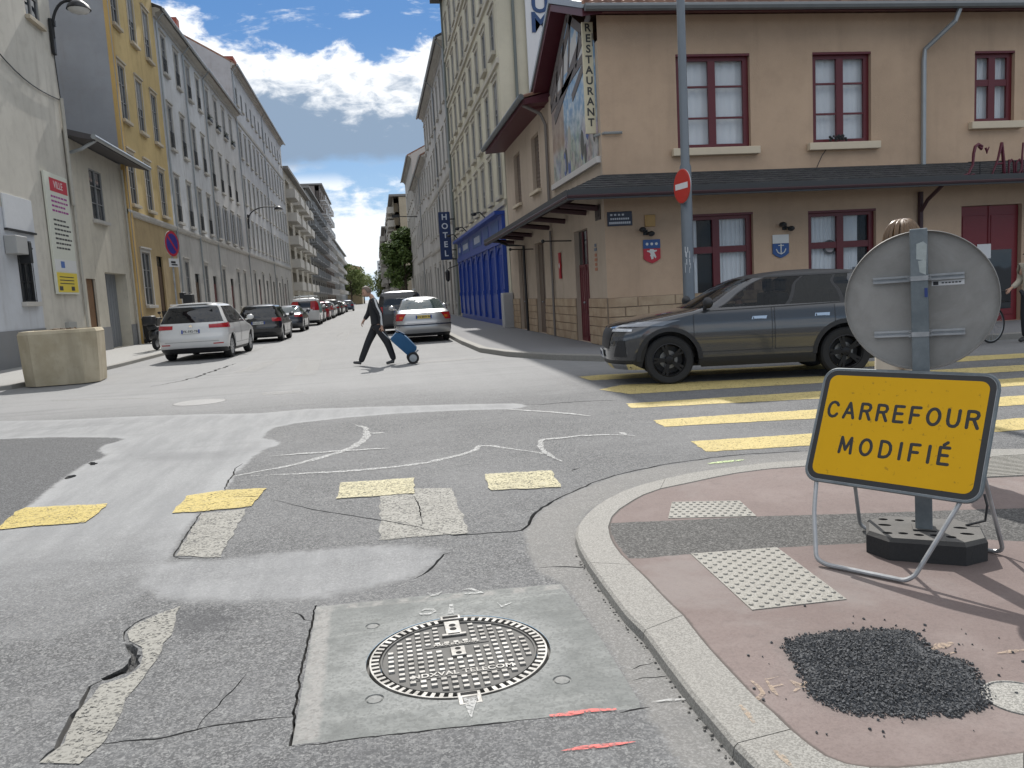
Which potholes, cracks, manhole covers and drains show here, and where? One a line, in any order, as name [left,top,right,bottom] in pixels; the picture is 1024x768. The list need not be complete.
crack [276,497,453,536]
crack [39,672,295,762]
manhole cover [366,614,551,705]
pothole [101,644,141,680]
manhole cover [981,680,1024,715]
